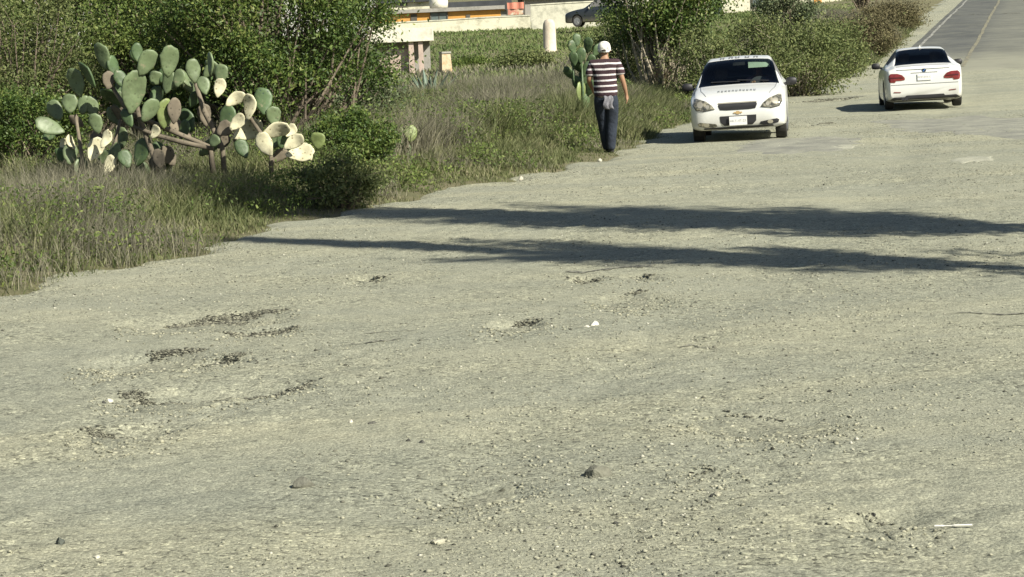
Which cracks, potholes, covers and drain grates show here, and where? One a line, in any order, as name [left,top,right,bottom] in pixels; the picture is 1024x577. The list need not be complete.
pothole [87,377,334,438]
pothole [468,317,570,342]
pothole [45,347,226,391]
pothole [573,289,686,321]
pothole [100,308,319,344]
crack [348,330,418,345]
pothole [562,277,622,292]
